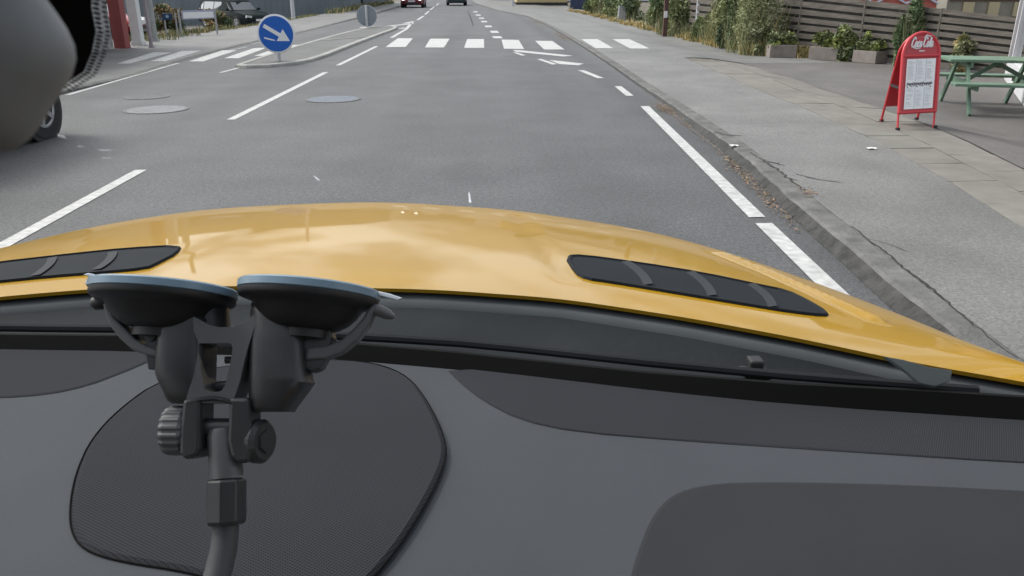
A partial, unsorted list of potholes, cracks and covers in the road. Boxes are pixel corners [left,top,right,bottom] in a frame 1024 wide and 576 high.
manhole cover [305,95,361,103]
manhole cover [122,105,190,114]
crack [717,132,836,190]
crack [851,226,1018,358]
